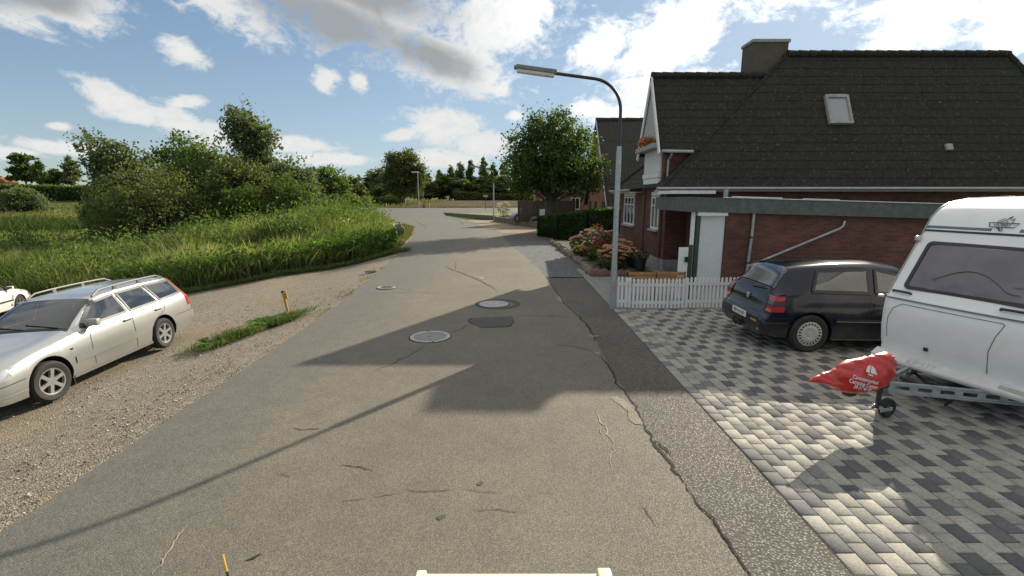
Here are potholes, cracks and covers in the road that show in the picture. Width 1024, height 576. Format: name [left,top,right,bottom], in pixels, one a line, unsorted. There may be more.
crack [152,525,187,574]
crack [447,262,752,576]
crack [342,488,527,513]
manhole cover [409,331,452,343]
